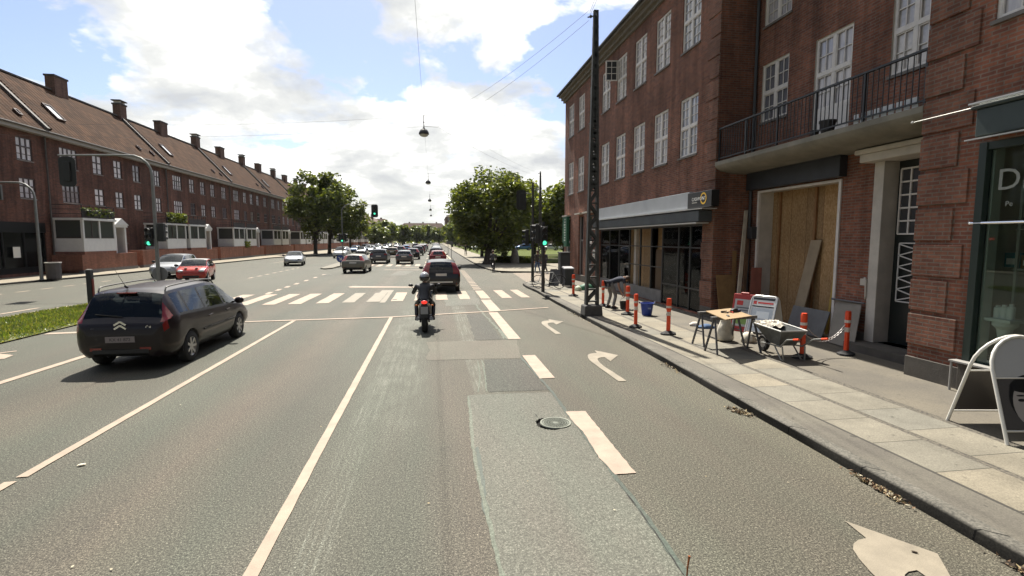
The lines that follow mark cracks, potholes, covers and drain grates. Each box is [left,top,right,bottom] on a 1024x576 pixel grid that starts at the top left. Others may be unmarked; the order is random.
manhole cover [540,417,571,429]
